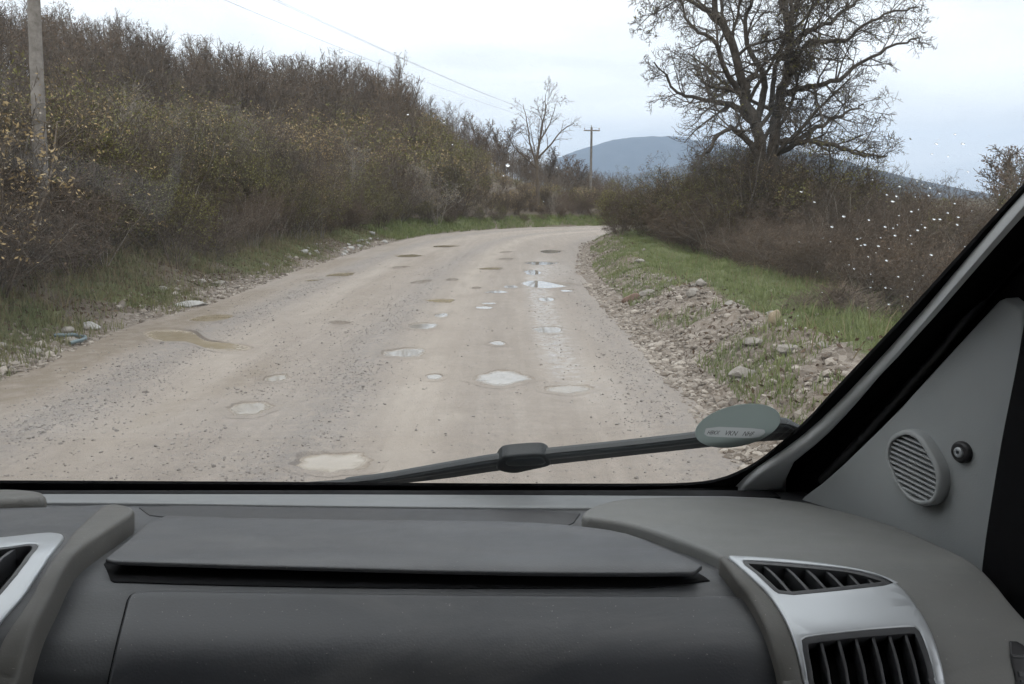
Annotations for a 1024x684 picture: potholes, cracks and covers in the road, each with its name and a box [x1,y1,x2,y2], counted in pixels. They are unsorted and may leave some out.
pothole [482,339,513,347]
pothole [515,280,587,289]
pothole [417,372,451,381]
pothole [463,367,545,389]
pothole [401,321,444,330]
pothole [525,325,568,335]
pothole [274,447,389,477]
pothole [131,326,263,353]
pothole [214,398,286,419]
pothole [372,346,434,359]
pothole [534,383,605,396]
pothole [254,372,301,384]
